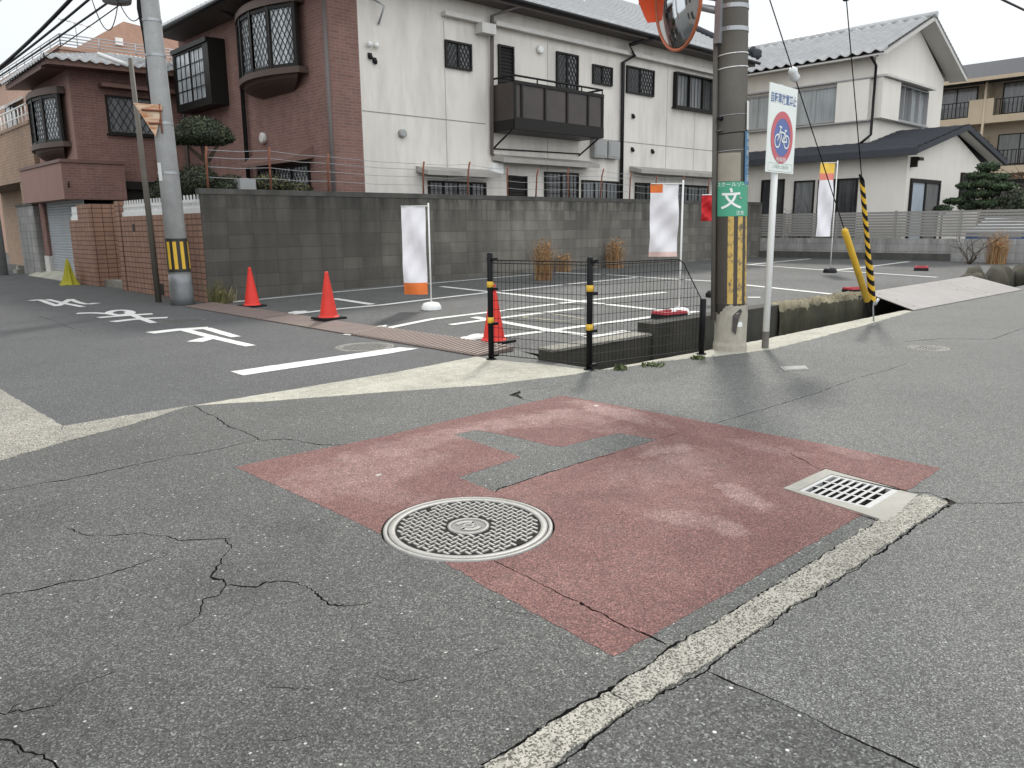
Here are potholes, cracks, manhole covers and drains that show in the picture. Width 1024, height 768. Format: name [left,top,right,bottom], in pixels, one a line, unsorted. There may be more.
crack [714,363,907,424]
manhole cover [381,497,555,562]
crack [0,738,59,768]
crack [0,528,371,631]
crack [480,457,1024,768]
drain grate [783,469,918,561]
crack [0,672,114,715]
crack [1,406,320,491]
manhole cover [335,342,394,352]
